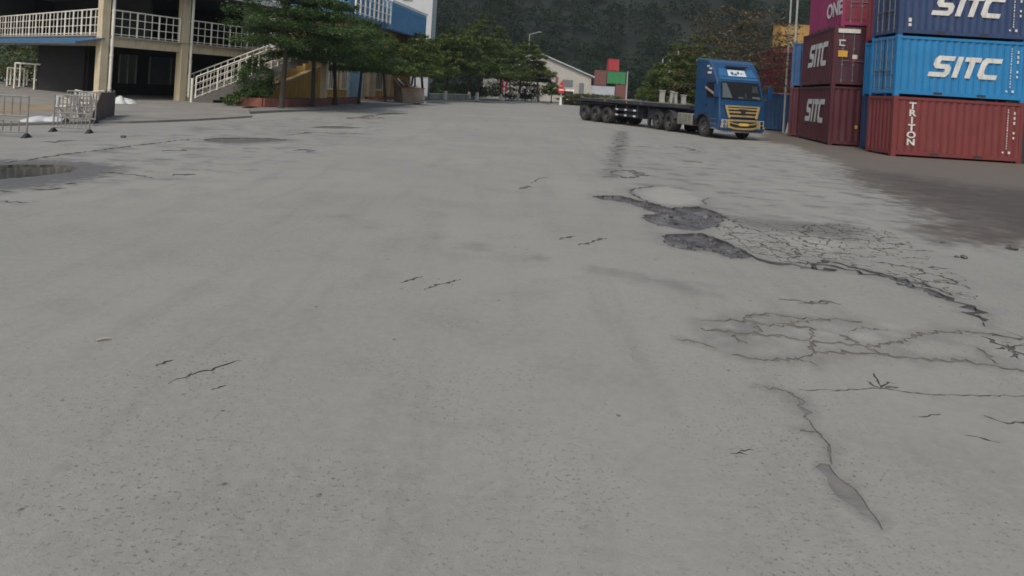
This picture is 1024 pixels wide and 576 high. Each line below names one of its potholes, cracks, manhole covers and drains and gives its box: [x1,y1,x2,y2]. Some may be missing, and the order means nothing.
pothole [662,233,752,259]
crack [677,211,1024,529]
pothole [0,164,78,178]
pothole [593,195,726,231]
crack [401,276,461,290]
